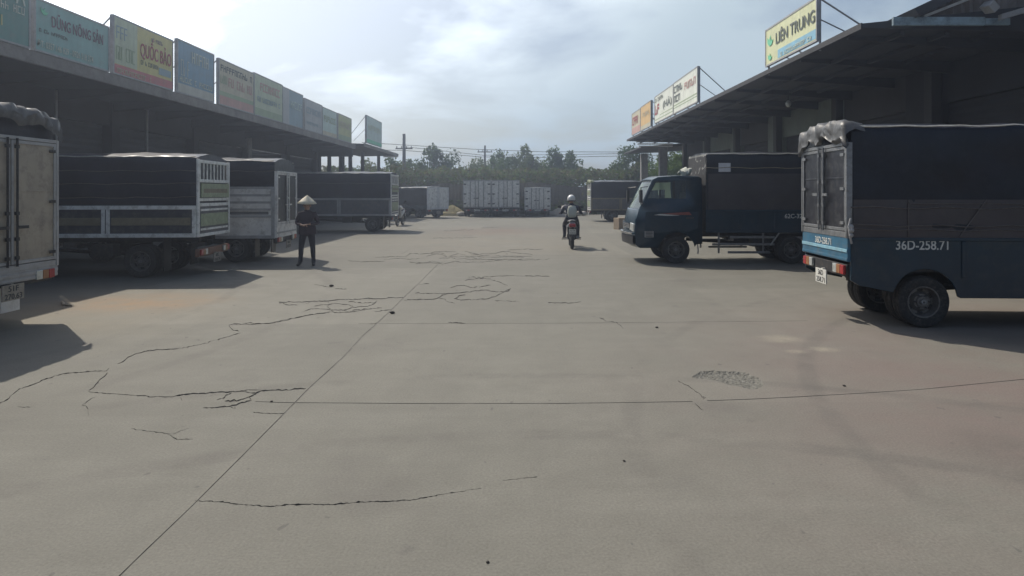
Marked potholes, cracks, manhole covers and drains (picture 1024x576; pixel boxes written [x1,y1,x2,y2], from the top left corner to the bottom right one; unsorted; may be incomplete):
crack [0,237,550,416]
pothole [692,370,764,390]
crack [196,477,535,507]
